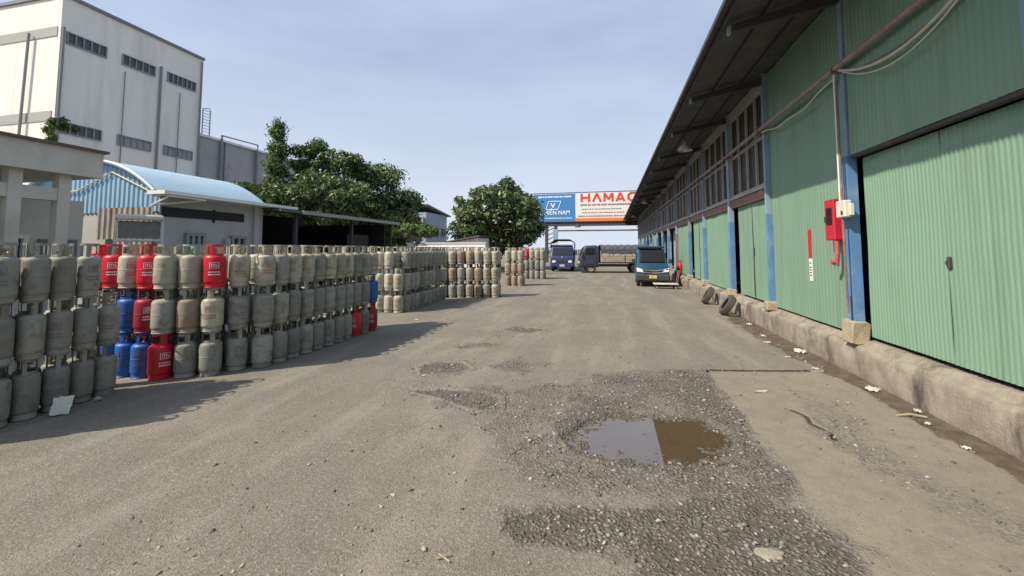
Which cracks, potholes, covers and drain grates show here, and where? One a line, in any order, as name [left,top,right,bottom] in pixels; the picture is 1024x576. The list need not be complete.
pothole [414,360,477,376]
crack [787,409,842,440]
pothole [552,408,747,471]
pothole [397,386,507,413]
